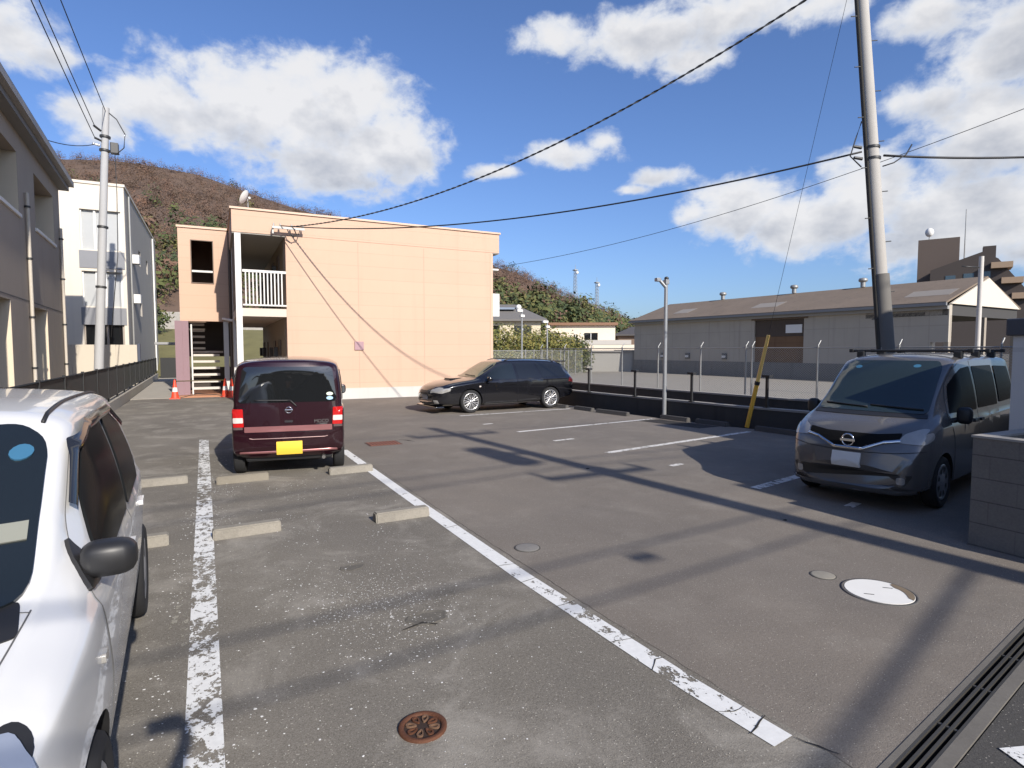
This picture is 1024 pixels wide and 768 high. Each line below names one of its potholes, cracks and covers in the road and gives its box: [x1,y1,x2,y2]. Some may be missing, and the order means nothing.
manhole cover [809,570,837,580]
manhole cover [398,711,447,744]
manhole cover [840,578,920,607]
manhole cover [514,543,541,553]
